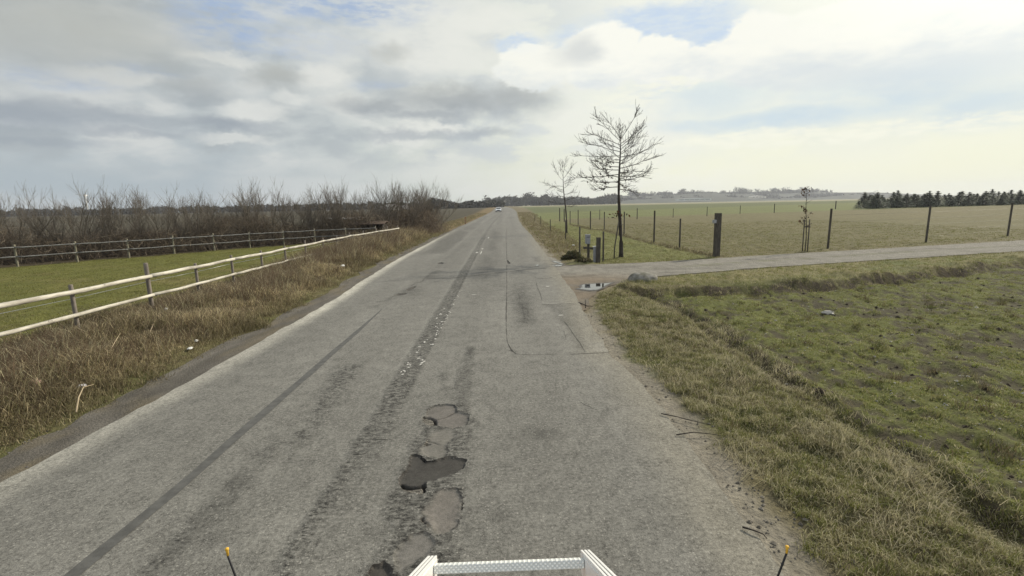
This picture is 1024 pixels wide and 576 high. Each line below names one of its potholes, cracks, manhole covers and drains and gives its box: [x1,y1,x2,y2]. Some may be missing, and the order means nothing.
pothole [367,560,398,576]
pothole [392,531,439,573]
pothole [420,487,464,535]
pothole [418,428,457,458]
pothole [398,454,467,494]
pothole [422,404,470,429]
